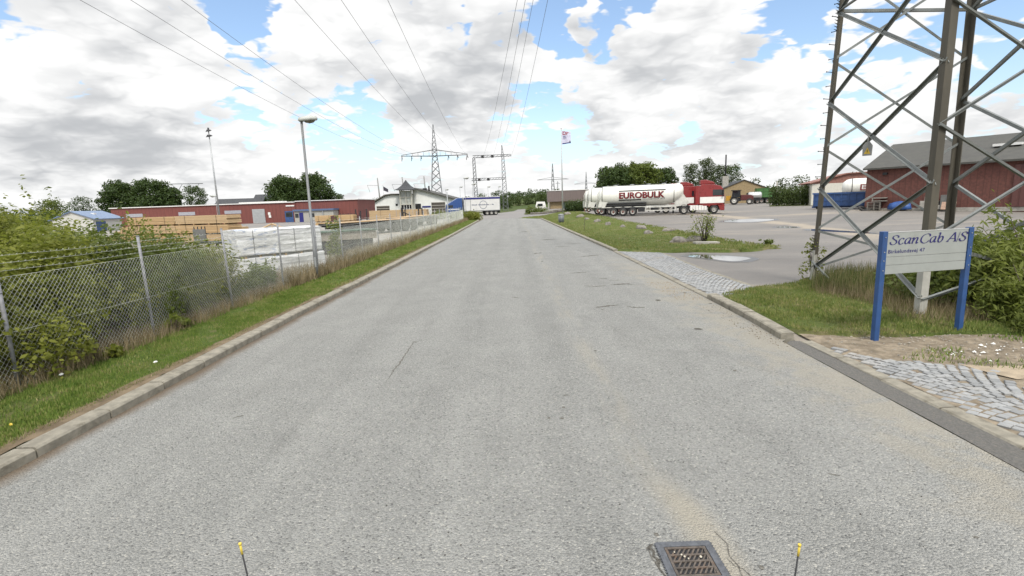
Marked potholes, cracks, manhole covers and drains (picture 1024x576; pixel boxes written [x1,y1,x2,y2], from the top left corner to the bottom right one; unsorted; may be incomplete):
crack [715,532,751,576]
drain grate [654,540,731,576]
